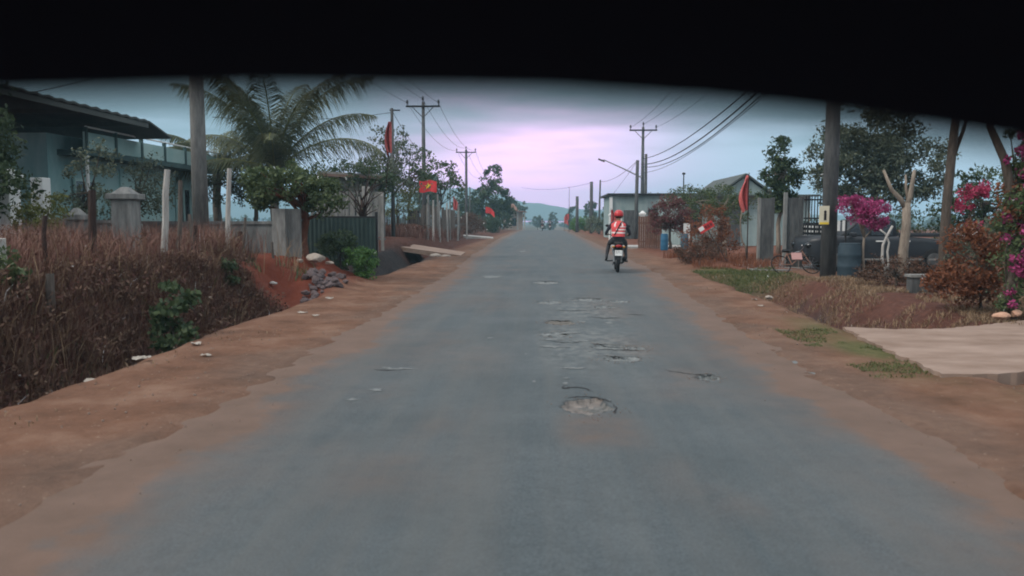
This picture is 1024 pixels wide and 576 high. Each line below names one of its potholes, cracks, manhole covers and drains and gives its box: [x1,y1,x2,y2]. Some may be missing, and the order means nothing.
pothole [561,398,614,416]
crack [562,385,617,413]
